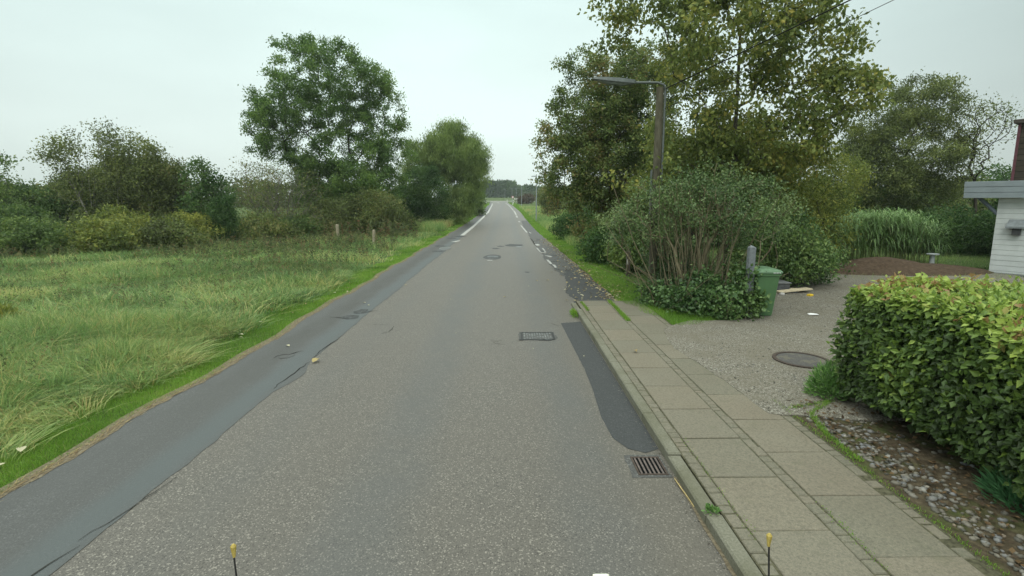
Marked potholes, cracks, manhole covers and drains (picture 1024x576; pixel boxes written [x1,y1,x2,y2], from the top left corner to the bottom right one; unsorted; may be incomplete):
drain grate [624,455,672,478]
manhole cover [518,332,558,340]
manhole cover [772,351,833,369]
